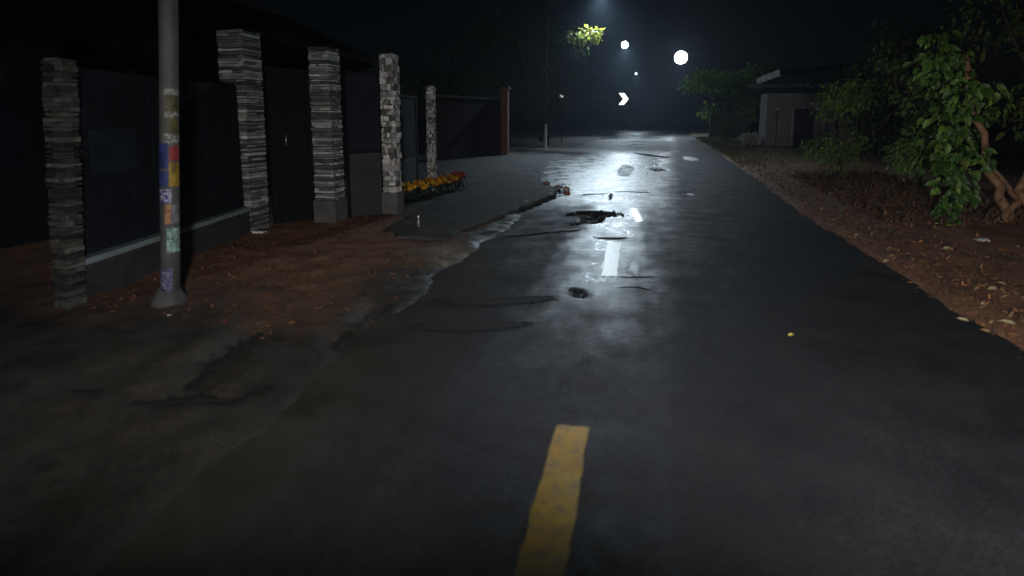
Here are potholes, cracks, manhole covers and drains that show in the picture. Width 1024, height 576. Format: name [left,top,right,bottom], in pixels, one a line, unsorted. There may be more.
pothole [566,210,624,224]
